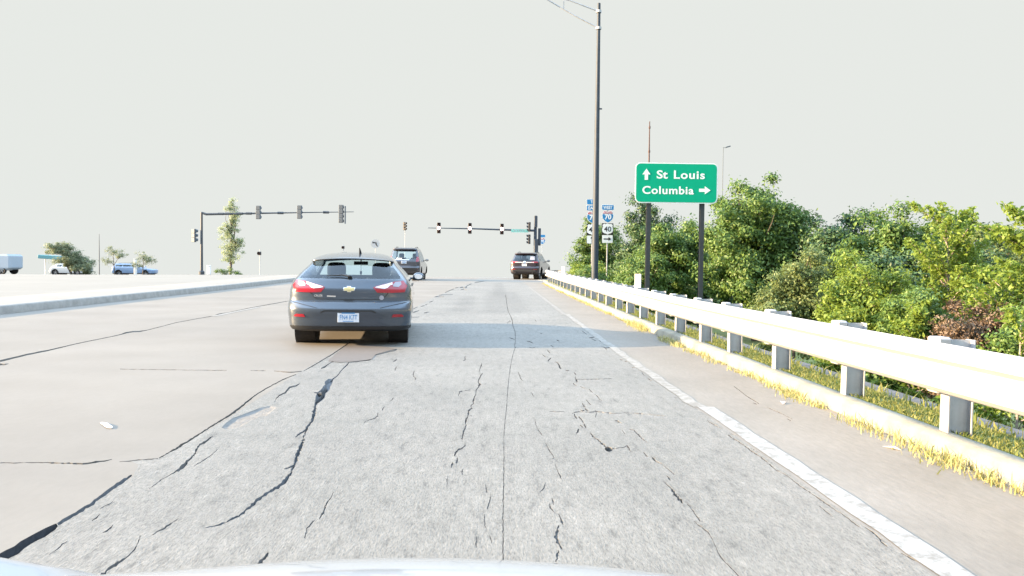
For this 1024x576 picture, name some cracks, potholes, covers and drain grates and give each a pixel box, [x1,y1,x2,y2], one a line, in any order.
crack [509,331,739,576]
crack [149,349,416,538]
crack [447,358,483,485]
crack [92,501,176,575]
crack [475,484,492,548]
